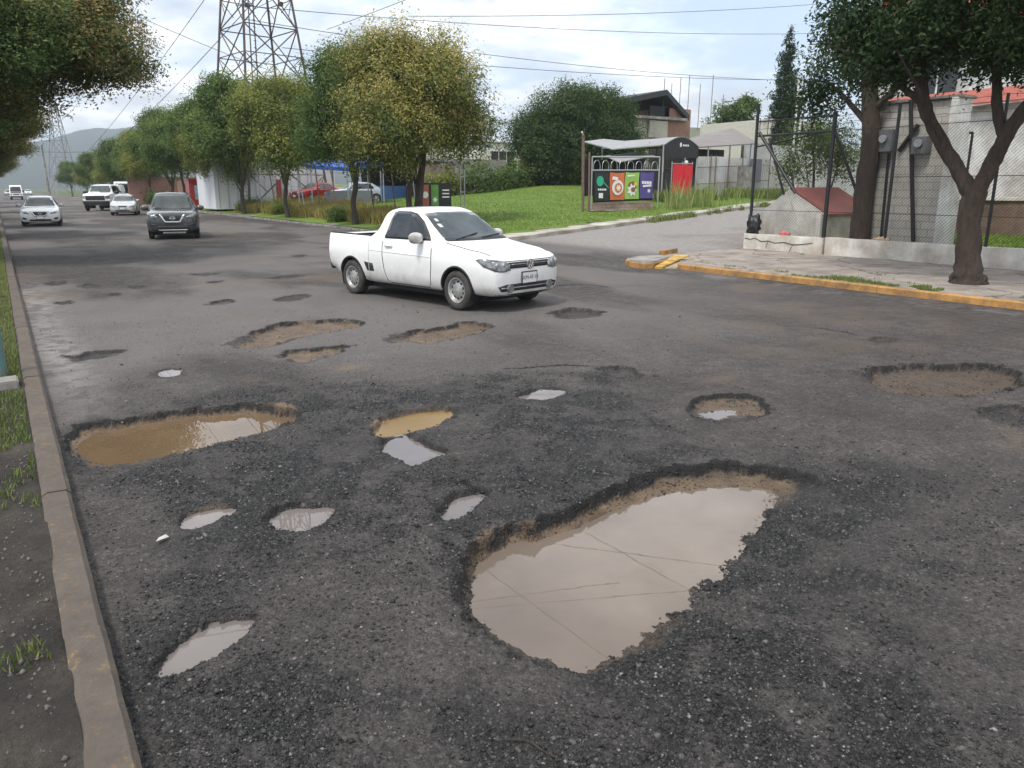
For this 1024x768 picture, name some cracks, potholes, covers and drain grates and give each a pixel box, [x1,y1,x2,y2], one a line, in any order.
pothole [58,401,308,484]
pothole [360,403,465,439]
pothole [127,603,280,693]
pothole [368,432,461,470]
pothole [677,391,780,426]
pothole [381,321,495,344]
pothole [441,457,892,690]
pothole [57,349,127,361]
pothole [274,344,356,363]
pothole [248,496,354,538]
pothole [147,368,191,379]
pothole [166,499,251,536]
